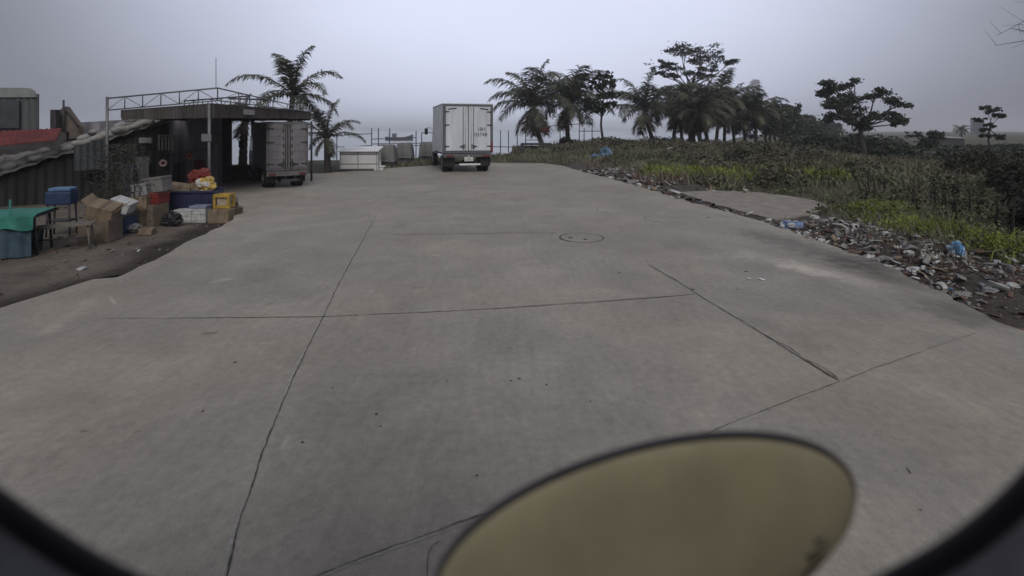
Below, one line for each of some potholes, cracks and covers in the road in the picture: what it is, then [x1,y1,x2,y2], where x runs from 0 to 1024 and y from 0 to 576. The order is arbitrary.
manhole cover [559,233,604,242]
